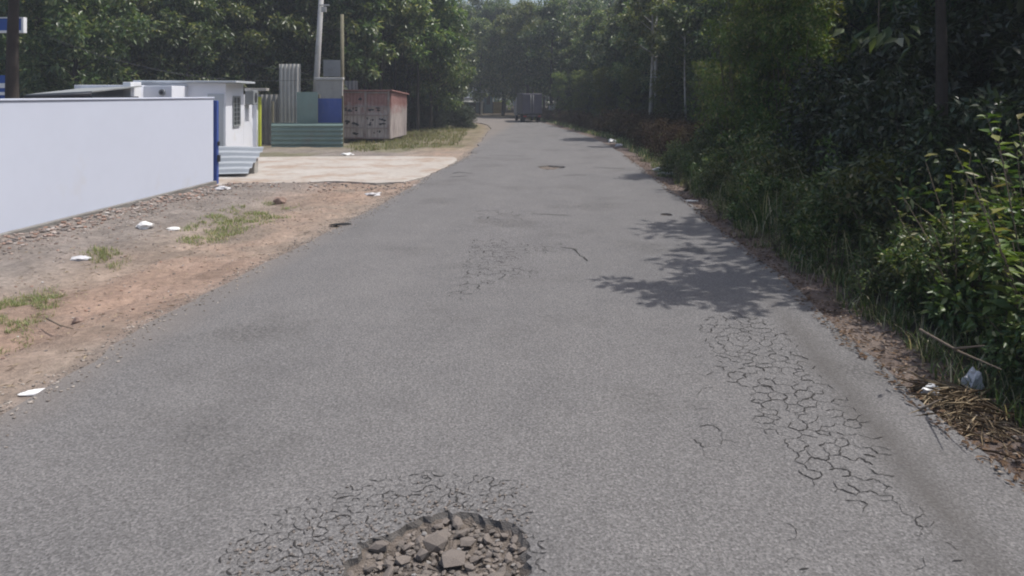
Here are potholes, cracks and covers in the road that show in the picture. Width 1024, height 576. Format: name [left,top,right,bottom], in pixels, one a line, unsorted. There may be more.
pothole [342,511,532,576]
crack [446,239,563,299]
crack [681,311,962,570]
crack [218,469,547,576]
